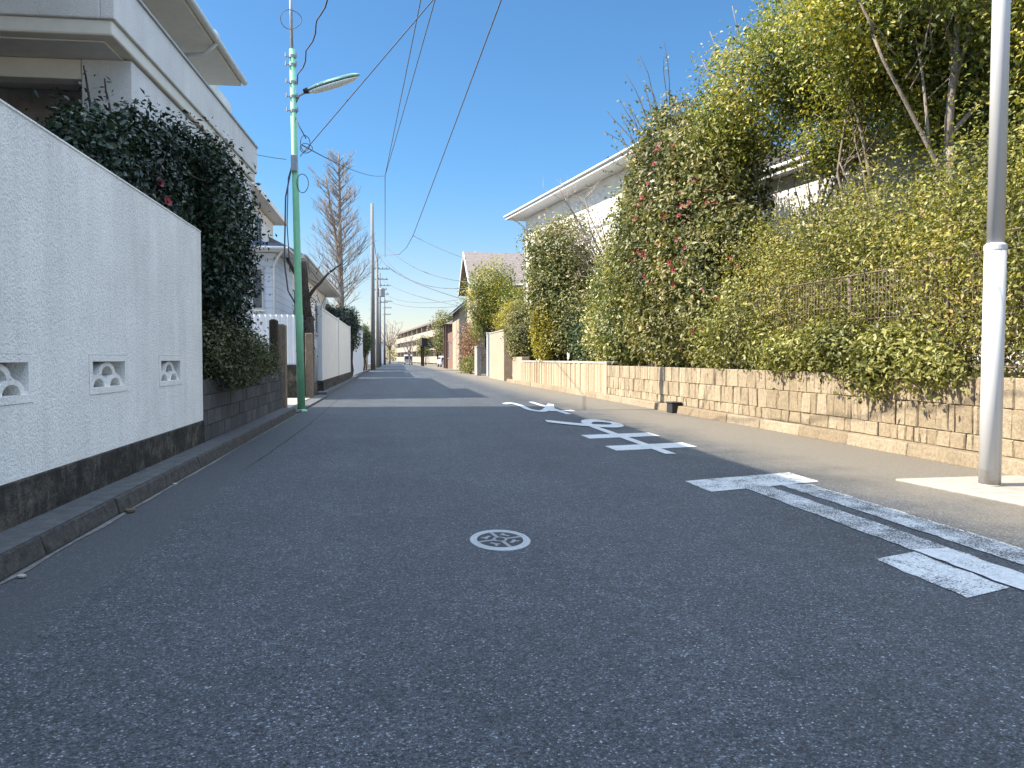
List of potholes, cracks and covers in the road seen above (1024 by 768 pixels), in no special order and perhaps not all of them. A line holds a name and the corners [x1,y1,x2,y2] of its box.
manhole cover [470,530,531,551]
